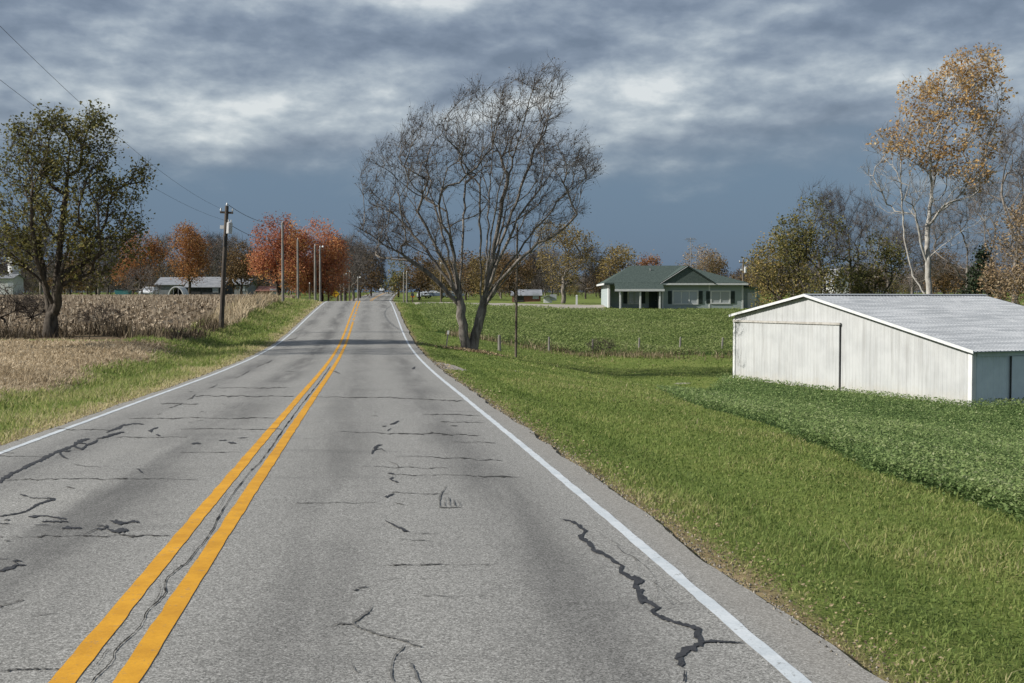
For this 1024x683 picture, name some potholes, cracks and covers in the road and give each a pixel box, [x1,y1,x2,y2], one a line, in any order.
crack [0,320,511,683]
crack [602,534,676,604]
